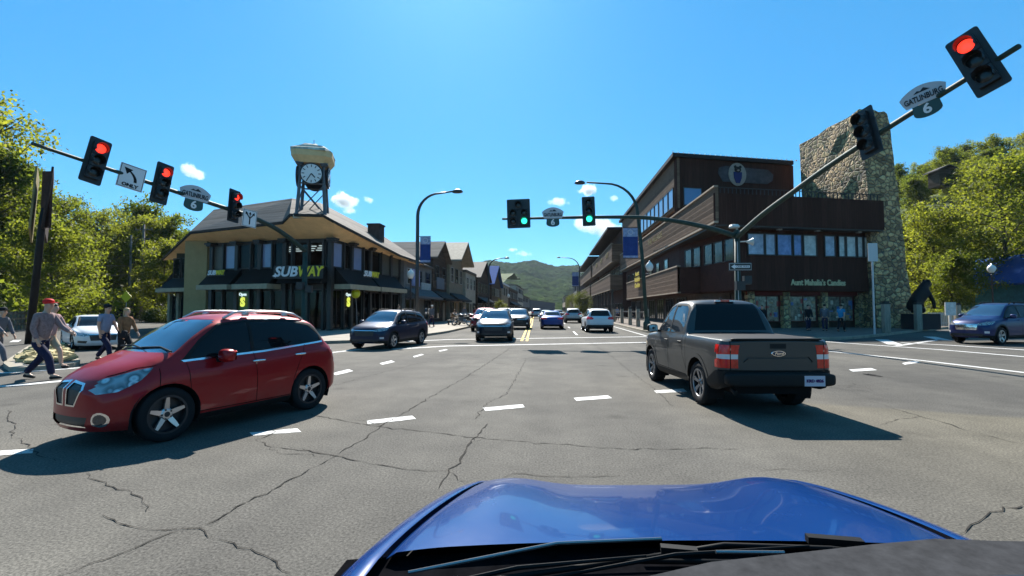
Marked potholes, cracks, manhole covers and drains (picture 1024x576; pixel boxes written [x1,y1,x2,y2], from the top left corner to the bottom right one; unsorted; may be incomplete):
crack [7,410,63,461]
crack [63,350,731,574]
crack [961,504,1024,534]
